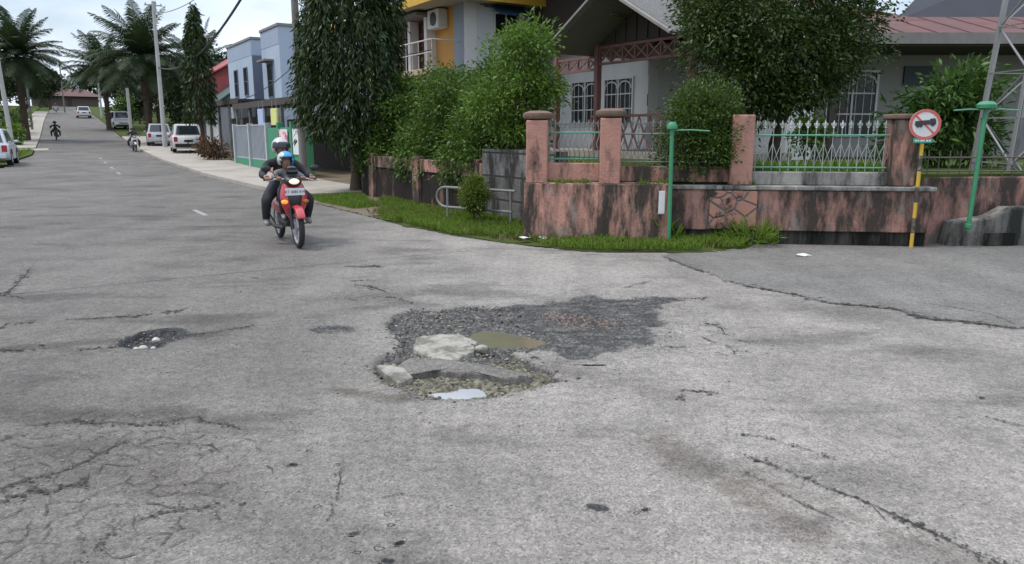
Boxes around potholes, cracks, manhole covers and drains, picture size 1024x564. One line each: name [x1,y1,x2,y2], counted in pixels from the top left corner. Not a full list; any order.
crack [0,410,273,564]
crack [731,281,1021,328]
crack [658,297,773,369]
crack [326,460,353,520]
pothole [113,328,195,350]
crack [734,430,1006,564]
crack [0,269,33,298]
crack [62,265,413,336]
pothole [368,305,570,402]
